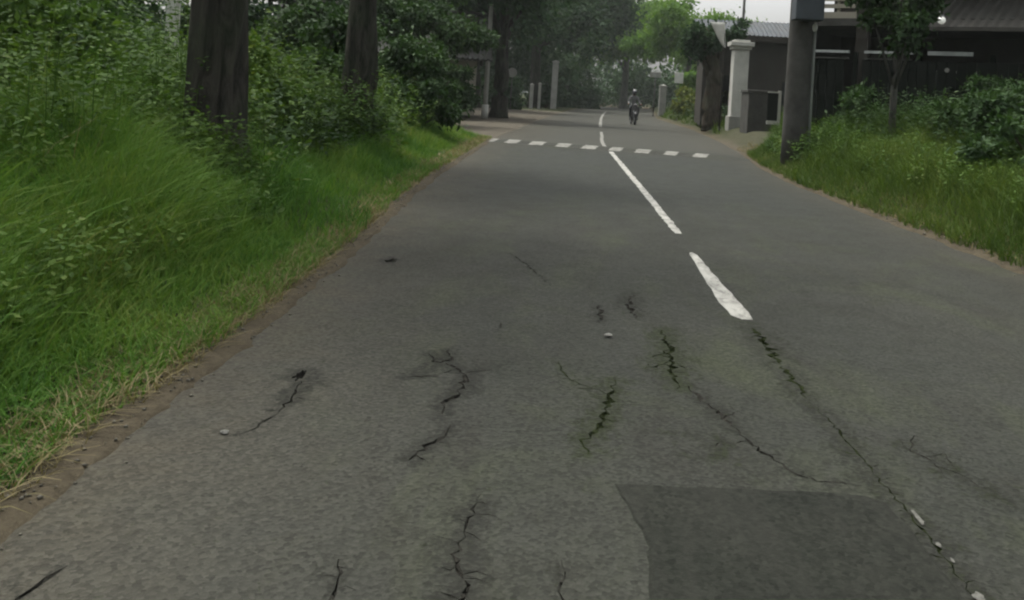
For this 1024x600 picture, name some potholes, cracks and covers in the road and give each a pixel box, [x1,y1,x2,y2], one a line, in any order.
crack [645,330,861,490]
crack [408,349,490,463]
crack [558,560,571,600]
crack [590,293,643,323]
crack [898,436,999,492]
crack [558,361,628,454]
crack [324,558,355,600]
crack [8,566,67,600]
crack [234,380,314,436]
crack [434,494,502,600]
